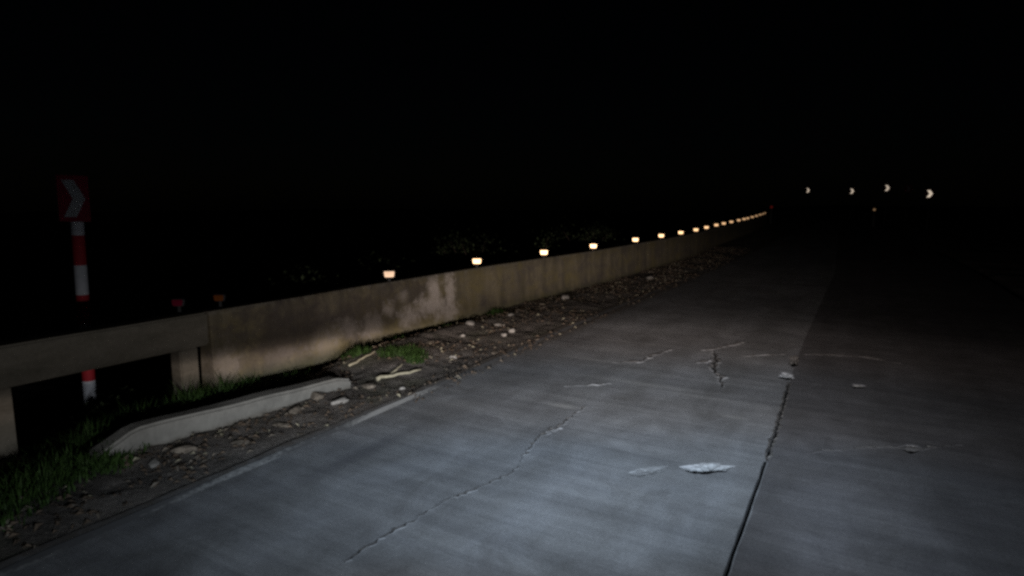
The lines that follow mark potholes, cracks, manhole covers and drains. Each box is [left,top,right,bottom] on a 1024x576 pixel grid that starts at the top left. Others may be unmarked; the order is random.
pothole [679,462,737,474]
crack [612,349,673,363]
crack [696,342,745,387]
crack [344,404,587,563]
